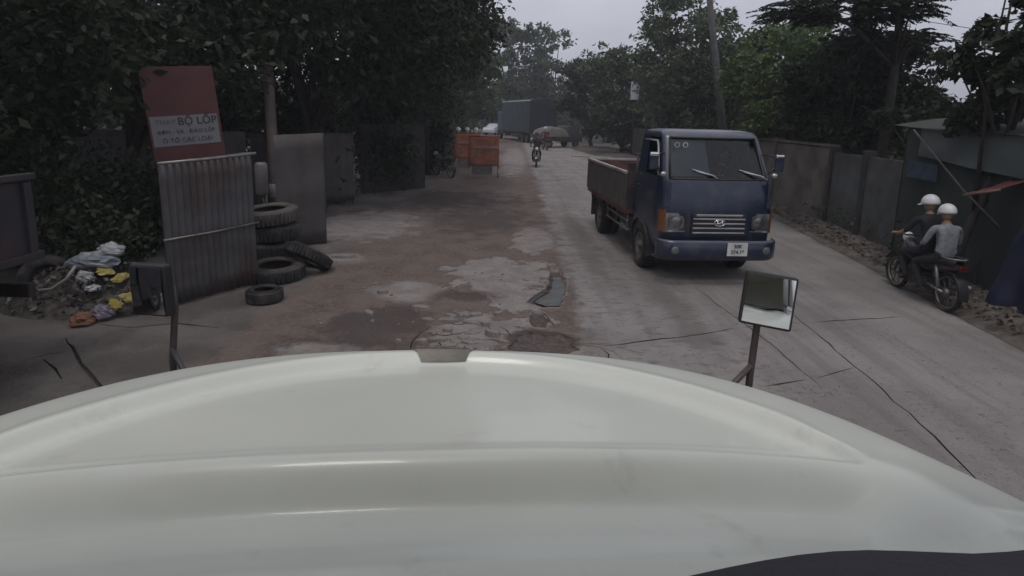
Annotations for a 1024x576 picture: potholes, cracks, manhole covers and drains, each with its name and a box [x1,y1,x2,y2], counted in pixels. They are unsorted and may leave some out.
pothole [508,332,580,354]
crack [22,323,218,387]
crack [410,315,511,351]
pothole [525,267,569,309]
crack [590,288,890,387]
